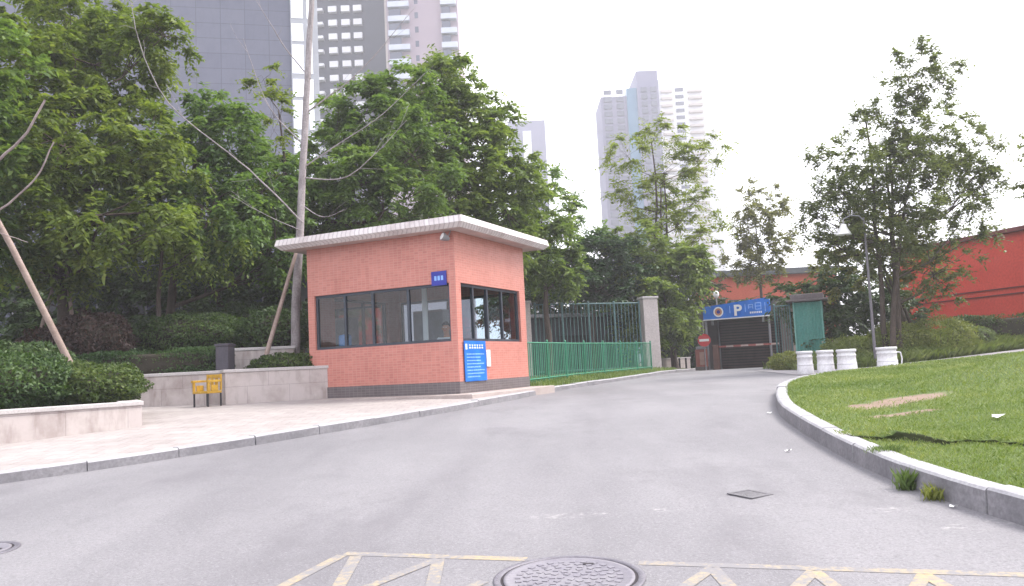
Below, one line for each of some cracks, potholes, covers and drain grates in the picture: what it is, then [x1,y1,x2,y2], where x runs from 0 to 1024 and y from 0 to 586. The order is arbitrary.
manhole cover [493,555,646,586]
manhole cover [0,541,21,554]
utility cover [727,489,773,499]
